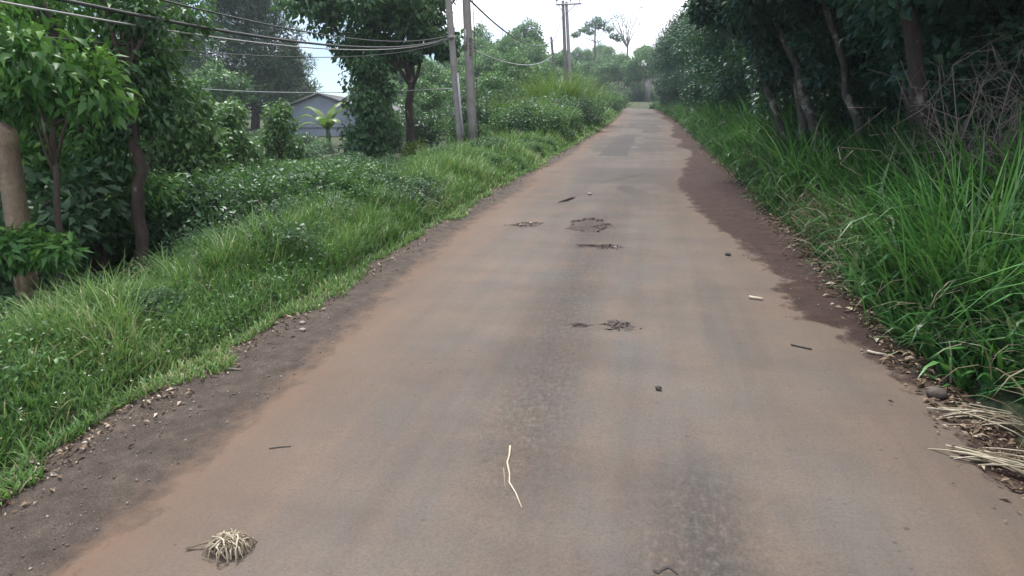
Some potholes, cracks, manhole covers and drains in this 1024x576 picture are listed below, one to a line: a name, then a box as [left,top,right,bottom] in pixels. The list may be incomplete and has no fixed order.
pothole [562,217,618,234]
pothole [556,319,644,334]
